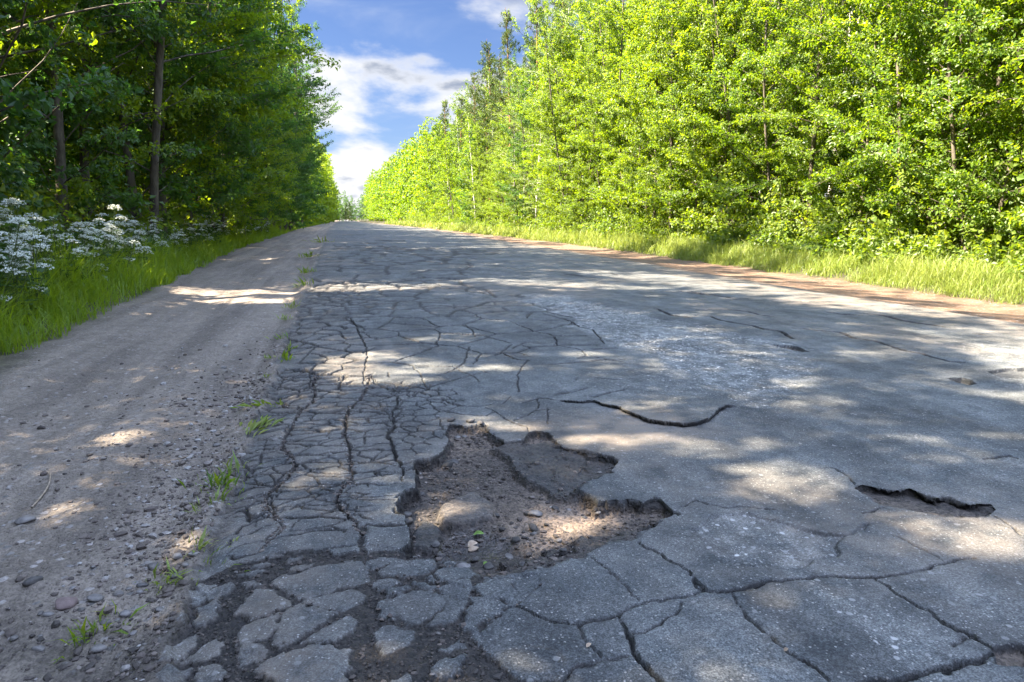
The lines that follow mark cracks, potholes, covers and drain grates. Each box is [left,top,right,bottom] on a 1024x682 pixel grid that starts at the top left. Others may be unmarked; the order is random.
crack [164,234,993,682]
pothole [393,424,680,578]
pothole [855,484,1000,518]
